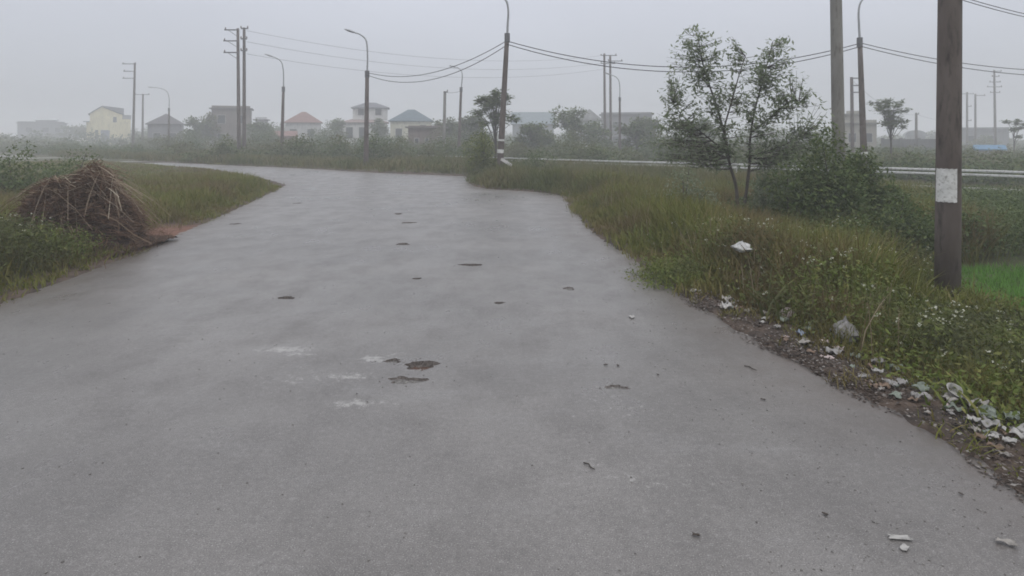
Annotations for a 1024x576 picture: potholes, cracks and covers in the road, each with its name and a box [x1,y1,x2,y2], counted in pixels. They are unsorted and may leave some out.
pothole [404,359,447,371]
pothole [379,374,433,387]
